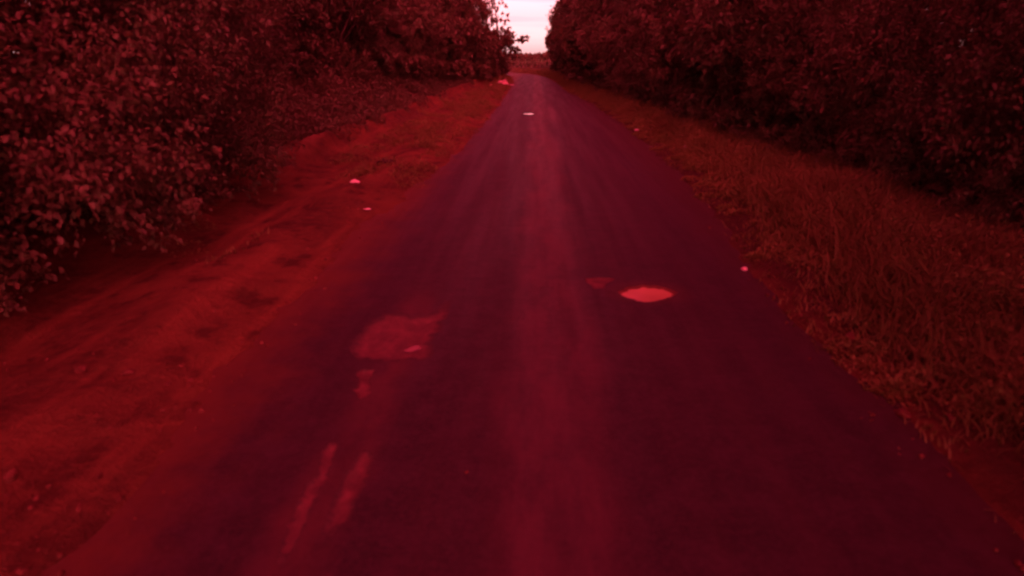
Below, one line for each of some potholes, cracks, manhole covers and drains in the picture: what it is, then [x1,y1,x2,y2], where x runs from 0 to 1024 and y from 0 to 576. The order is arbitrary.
pothole [616,284,678,302]
pothole [585,277,615,289]
